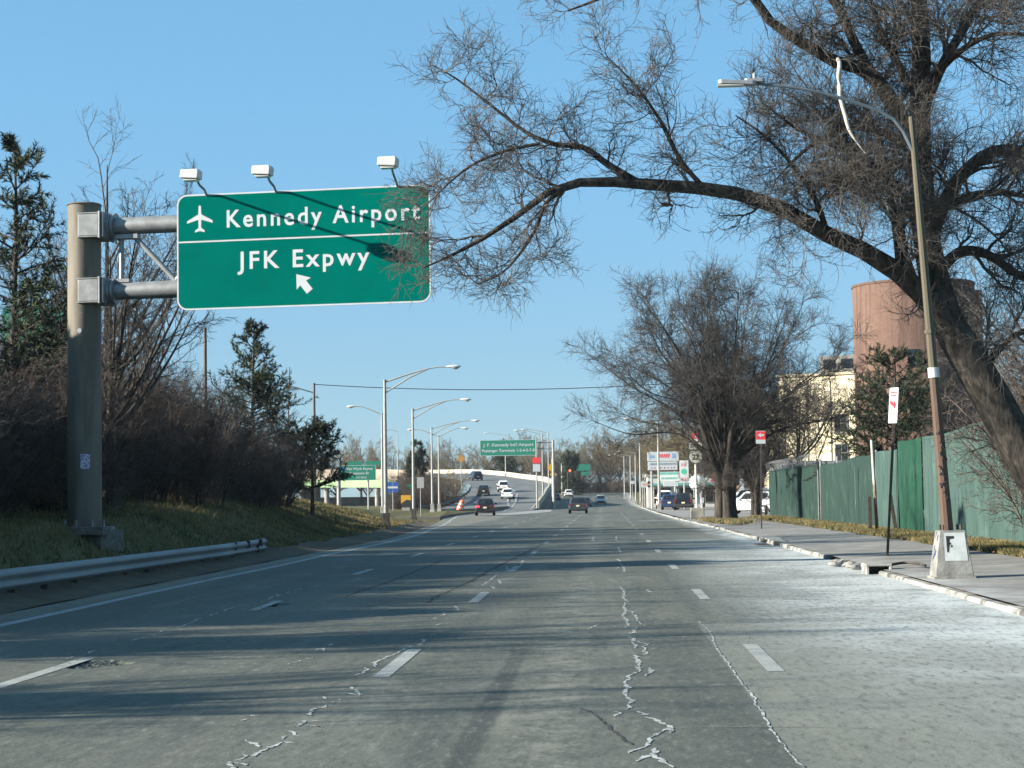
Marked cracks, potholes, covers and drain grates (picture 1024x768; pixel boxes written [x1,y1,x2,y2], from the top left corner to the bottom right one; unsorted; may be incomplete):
crack [581,536,883,767]
crack [221,586,496,768]
drain grate [861,561,927,575]
